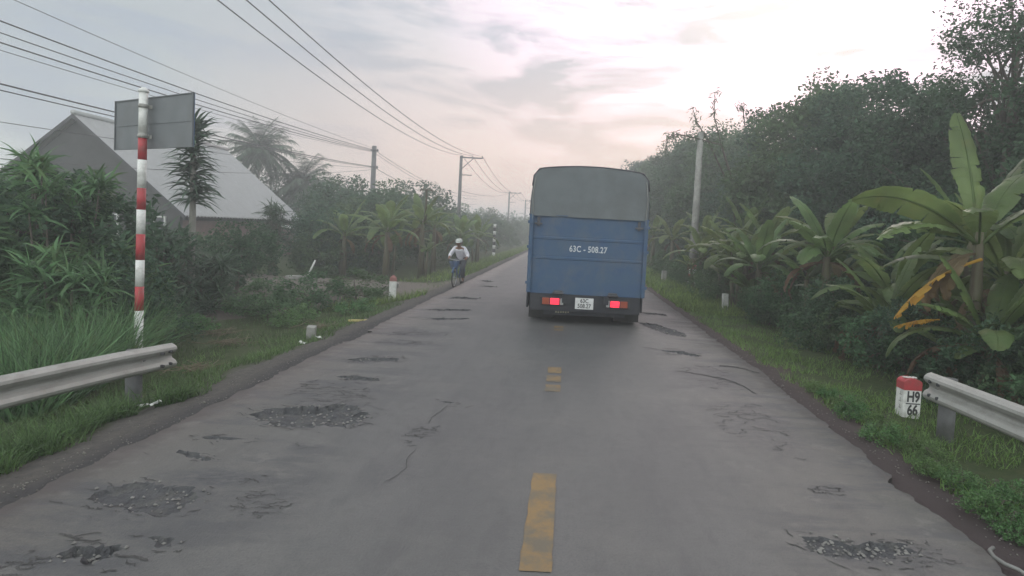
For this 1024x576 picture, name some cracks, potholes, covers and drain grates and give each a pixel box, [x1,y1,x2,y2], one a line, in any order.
crack [682,365,805,460]
pothole [190,434,257,445]
pothole [142,450,222,462]
pothole [333,372,380,384]
pothole [49,477,214,520]
pothole [644,347,702,358]
pothole [240,401,380,433]
crack [231,475,292,518]
pothole [637,322,687,337]
pothole [785,529,929,571]
crack [384,405,448,482]
pothole [33,532,144,573]
